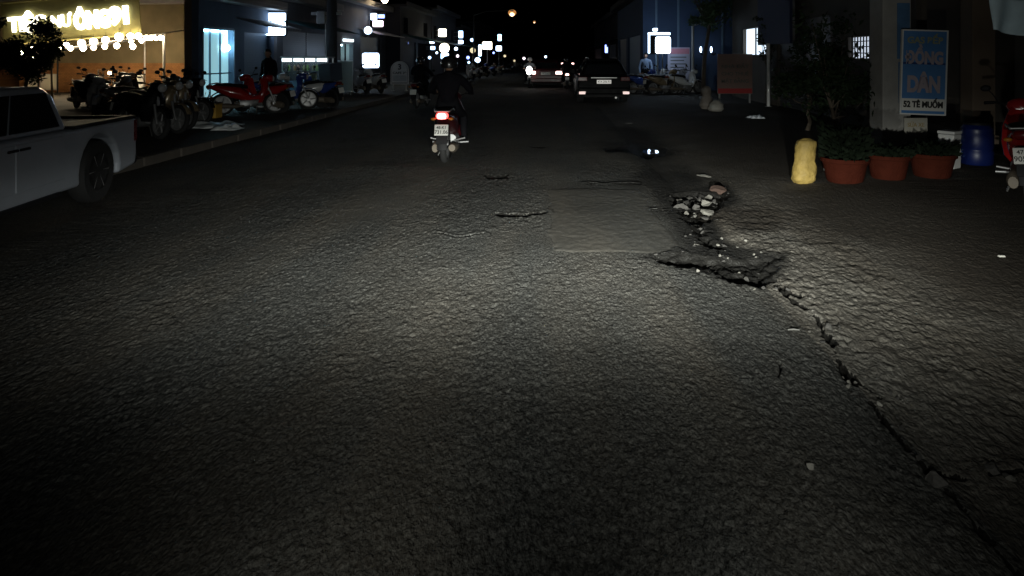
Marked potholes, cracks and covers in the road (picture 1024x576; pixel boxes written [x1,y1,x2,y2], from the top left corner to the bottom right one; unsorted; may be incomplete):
crack [764,281,1024,576]
pothole [595,139,672,160]
pothole [644,247,795,293]
crack [427,230,491,240]
pothole [662,187,743,253]
